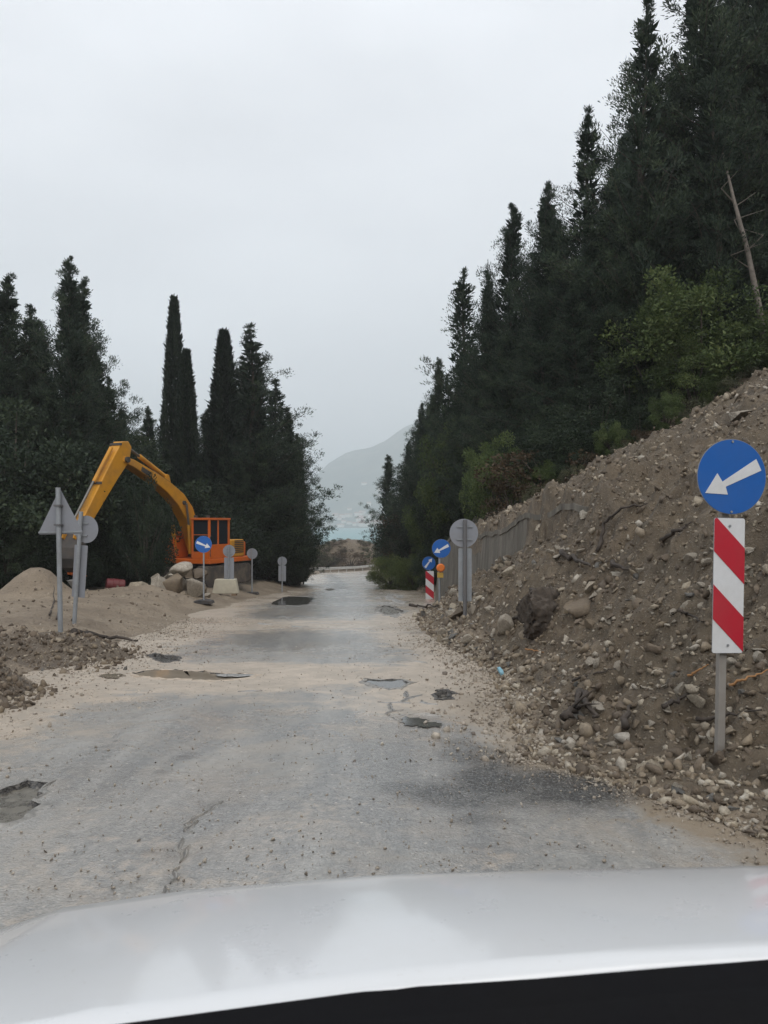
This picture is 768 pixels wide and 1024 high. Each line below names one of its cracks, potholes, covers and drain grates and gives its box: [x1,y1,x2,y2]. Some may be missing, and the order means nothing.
pothole [359,678,417,690]
pothole [0,777,56,828]
crack [161,801,223,894]
crack [378,691,442,723]
pothole [373,605,409,618]
pothole [128,669,262,682]
pothole [146,653,182,663]
pothole [431,689,458,701]
